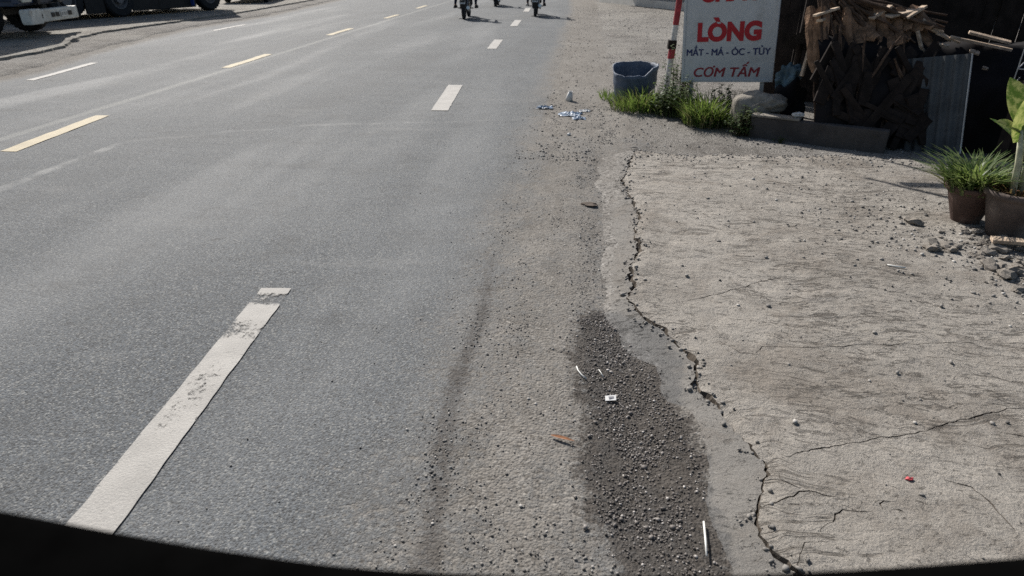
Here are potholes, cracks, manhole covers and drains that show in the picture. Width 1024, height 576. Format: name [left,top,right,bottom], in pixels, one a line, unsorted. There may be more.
crack [620,152,1024,573]
